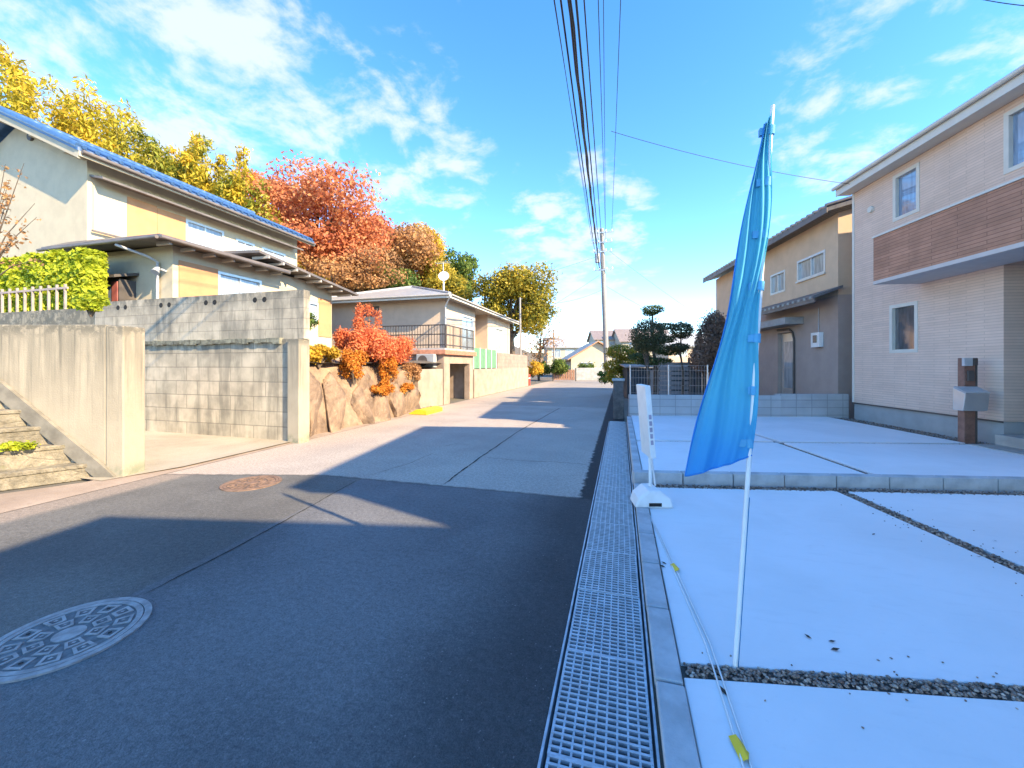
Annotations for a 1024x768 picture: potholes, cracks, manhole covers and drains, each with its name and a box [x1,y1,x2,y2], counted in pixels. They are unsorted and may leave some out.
drain grate [578,549,640,598]
drain grate [604,448,628,456]
drain grate [586,522,637,559]
drain grate [598,473,631,488]
manhole cover [0,597,152,684]
drain grate [602,455,629,465]
drain grate [591,501,634,526]
manhole cover [219,475,282,492]
drain grate [595,486,632,505]
drain grate [567,589,646,666]
drain grate [545,753,602,768]
drain grate [600,463,630,475]
